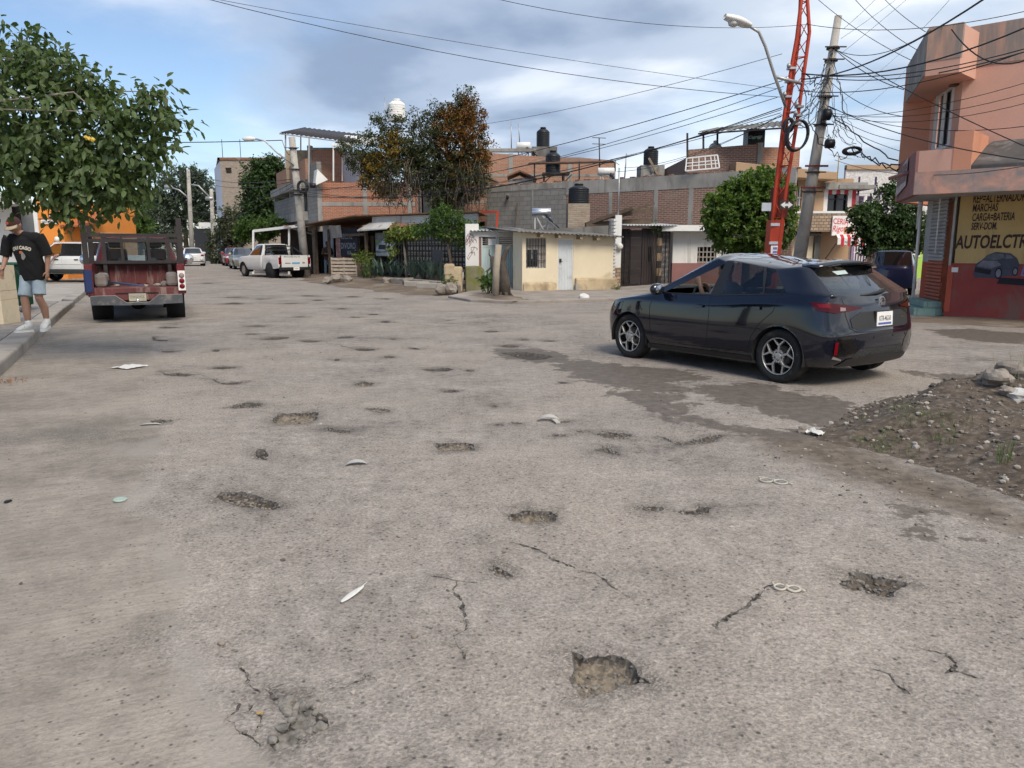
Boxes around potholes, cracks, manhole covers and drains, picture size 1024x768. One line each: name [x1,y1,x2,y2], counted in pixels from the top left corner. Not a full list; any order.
pothole [267,690,329,751]
pothole [254,448,269,460]
pothole [678,504,711,515]
crack [513,542,630,598]
crack [431,576,477,660]
pothole [839,572,911,598]
pothole [569,651,651,698]
crack [872,649,977,695]
pothole [215,492,281,510]
pothole [271,412,319,425]
pothole [433,443,475,452]
pothole [508,510,558,524]
